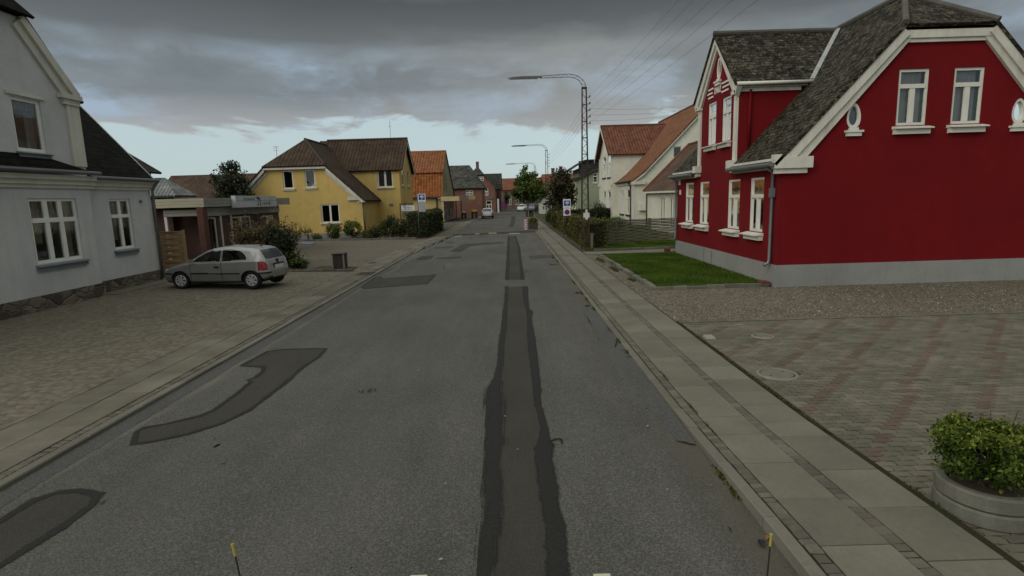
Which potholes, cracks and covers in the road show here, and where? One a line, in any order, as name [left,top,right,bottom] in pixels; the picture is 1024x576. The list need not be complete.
manhole cover [756,368,799,381]
